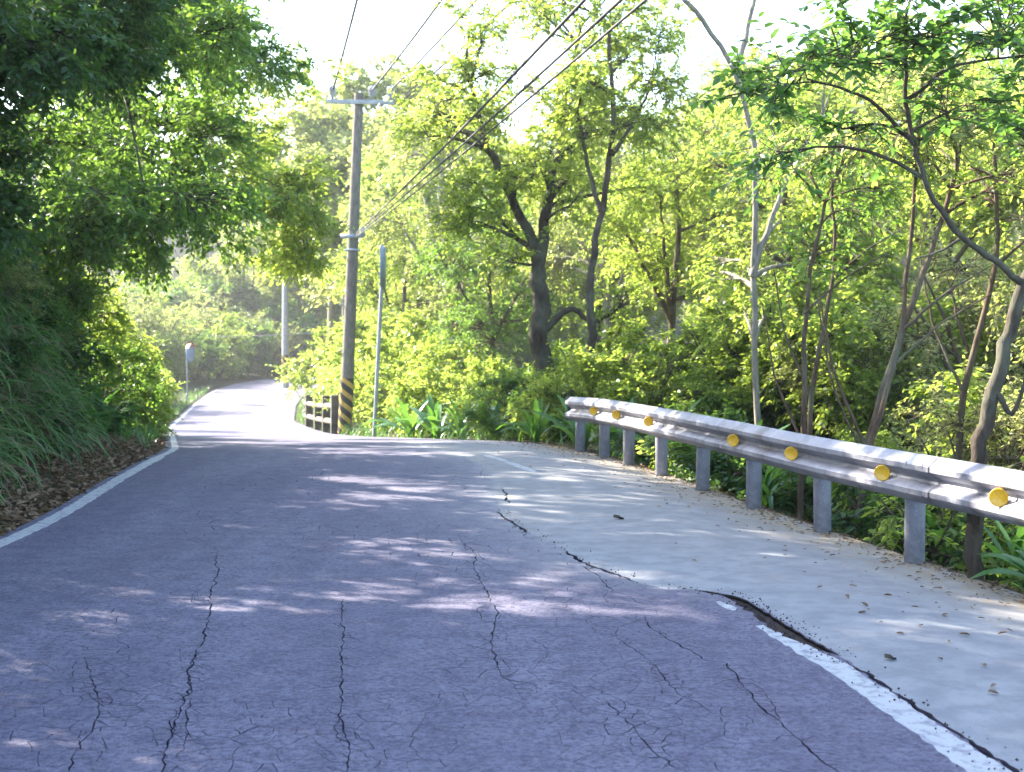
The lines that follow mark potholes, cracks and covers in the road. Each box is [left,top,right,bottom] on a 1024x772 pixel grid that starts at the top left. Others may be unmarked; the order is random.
crack [0,498,1020,772]
